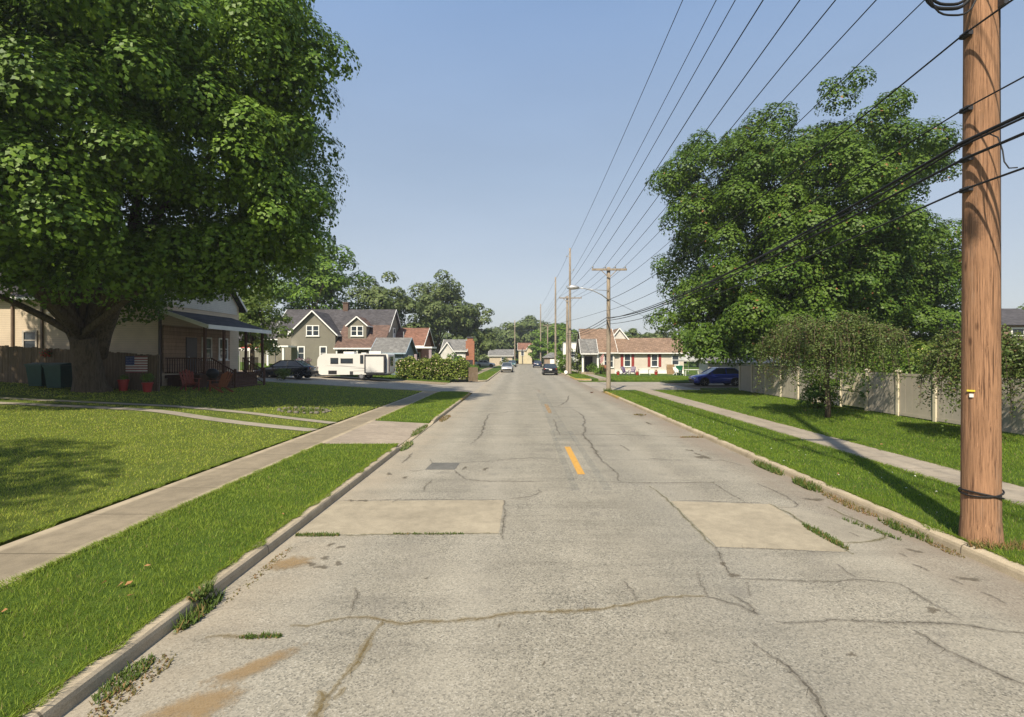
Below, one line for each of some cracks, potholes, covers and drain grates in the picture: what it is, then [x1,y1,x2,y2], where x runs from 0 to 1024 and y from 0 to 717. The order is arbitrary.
crack [692,553,1023,680]
crack [755,643,826,717]
crack [300,581,688,717]
crack [551,397,743,501]
